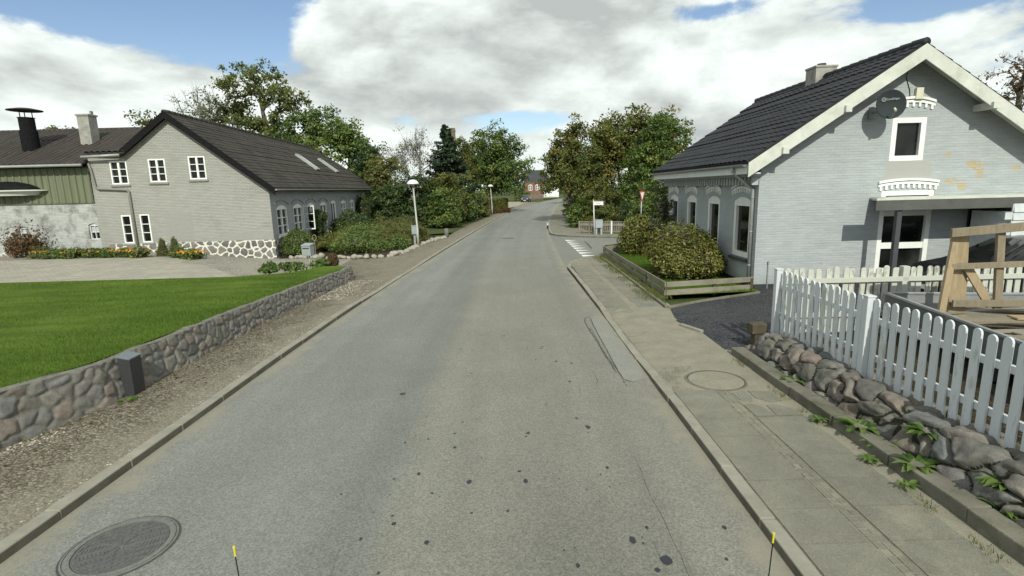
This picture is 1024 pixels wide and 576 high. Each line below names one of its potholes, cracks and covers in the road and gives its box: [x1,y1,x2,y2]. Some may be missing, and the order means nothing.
manhole cover [55,516,182,576]
manhole cover [685,370,748,391]
